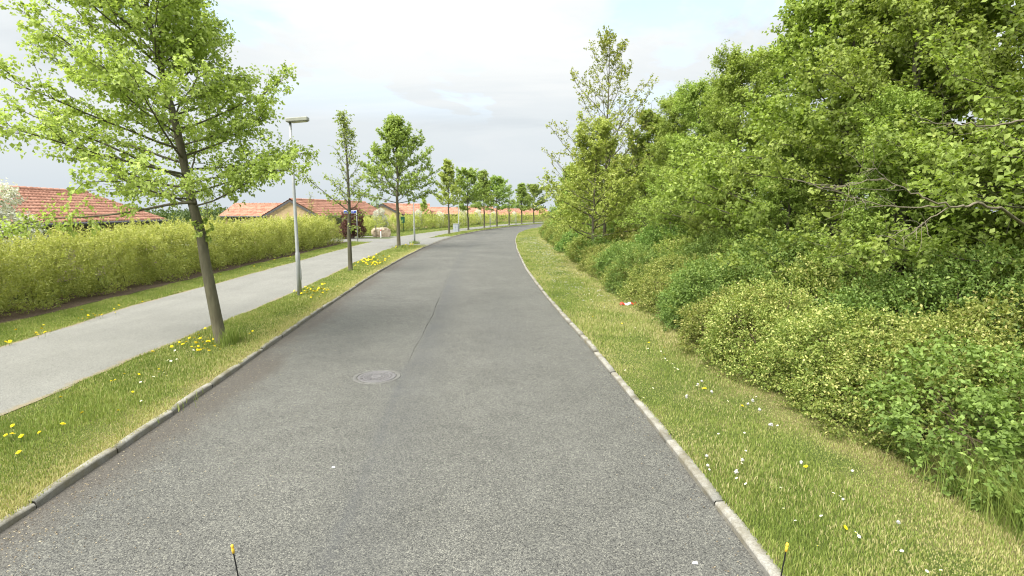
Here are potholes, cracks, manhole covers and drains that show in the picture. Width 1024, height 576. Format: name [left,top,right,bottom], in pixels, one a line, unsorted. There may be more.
manhole cover [353,370,401,384]
